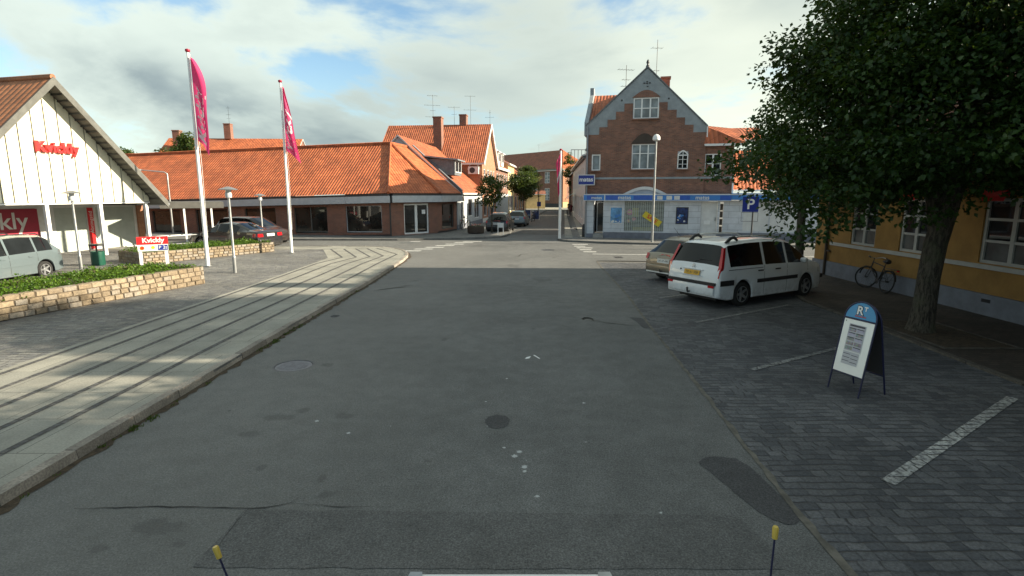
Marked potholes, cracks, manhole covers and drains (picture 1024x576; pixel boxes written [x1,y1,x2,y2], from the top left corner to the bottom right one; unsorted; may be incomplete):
manhole cover [272,359,315,372]
